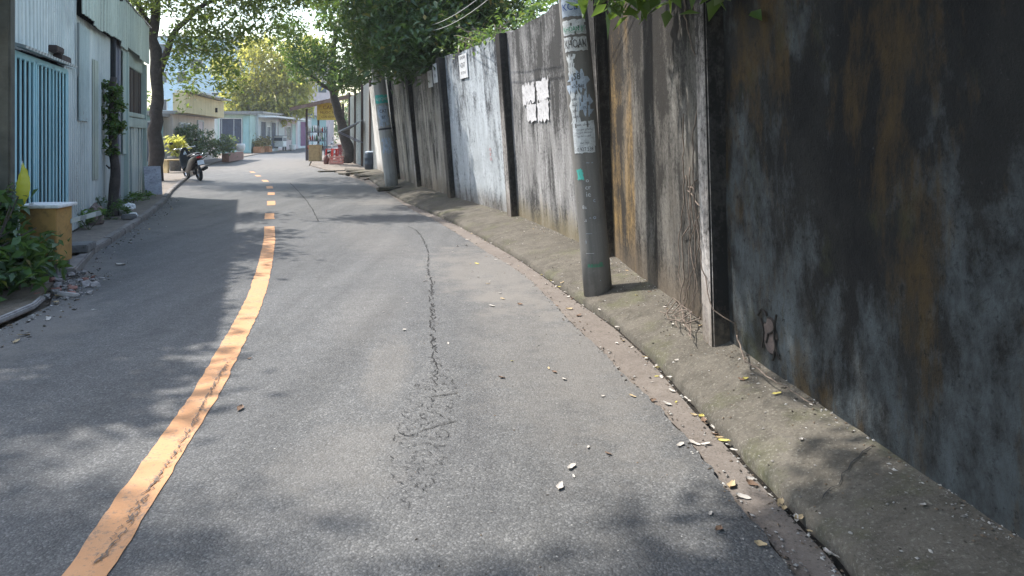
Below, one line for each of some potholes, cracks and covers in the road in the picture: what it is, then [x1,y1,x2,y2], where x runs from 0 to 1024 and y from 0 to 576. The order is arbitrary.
crack [390,226,460,509]
crack [822,445,872,499]
